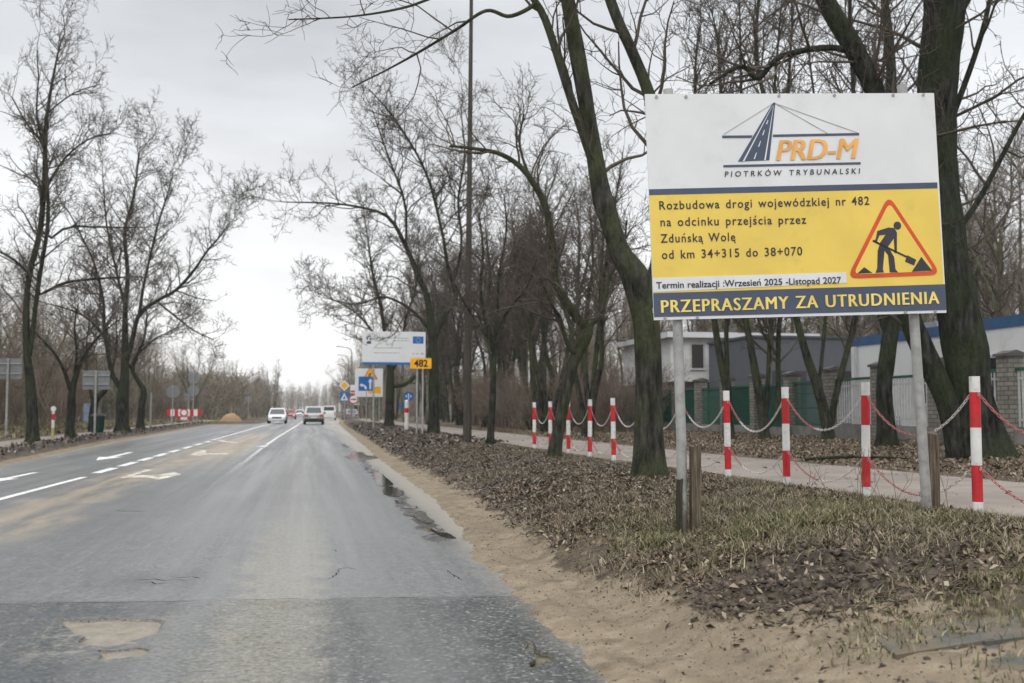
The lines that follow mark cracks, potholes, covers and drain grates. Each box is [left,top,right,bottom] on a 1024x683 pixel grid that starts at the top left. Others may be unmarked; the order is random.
pothole [98,648,150,660]
pothole [60,618,165,647]
pothole [524,640,558,668]
